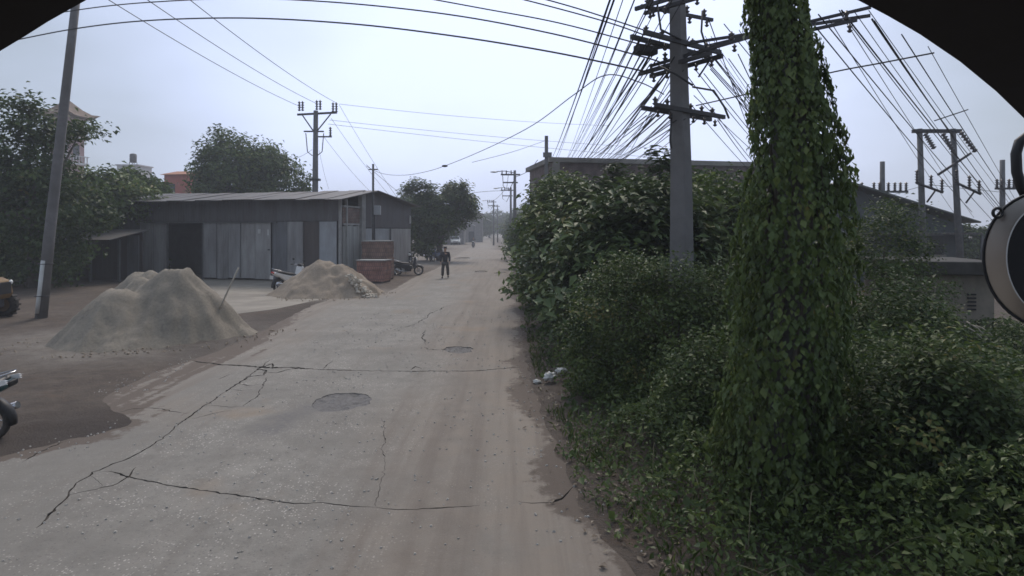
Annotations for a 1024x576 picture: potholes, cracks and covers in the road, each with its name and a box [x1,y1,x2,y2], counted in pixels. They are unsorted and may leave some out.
pothole [443,346,473,354]
pothole [312,393,372,412]
crack [36,306,573,528]
